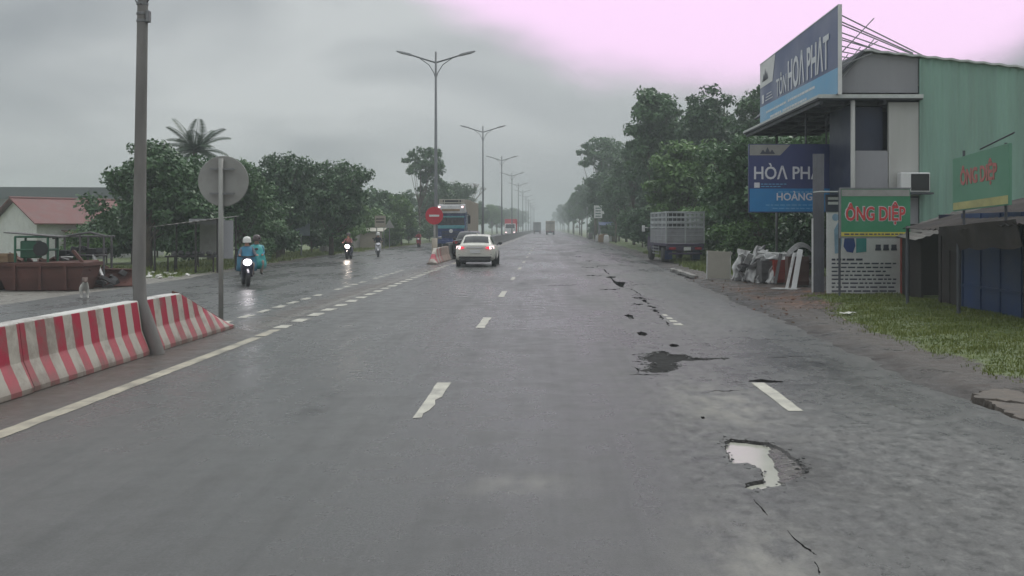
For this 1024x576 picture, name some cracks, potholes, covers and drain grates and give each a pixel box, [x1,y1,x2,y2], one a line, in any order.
crack [754,500,820,575]
crack [570,251,670,326]
pothole [717,435,812,493]
